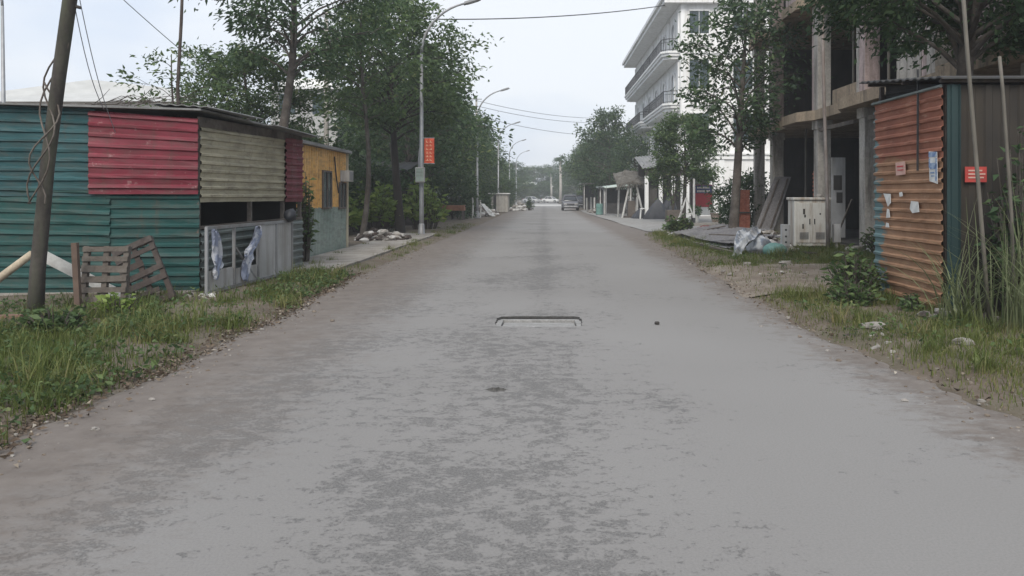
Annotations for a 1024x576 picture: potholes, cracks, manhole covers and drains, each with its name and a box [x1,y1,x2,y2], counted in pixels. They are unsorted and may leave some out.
manhole cover [495,316,582,327]
